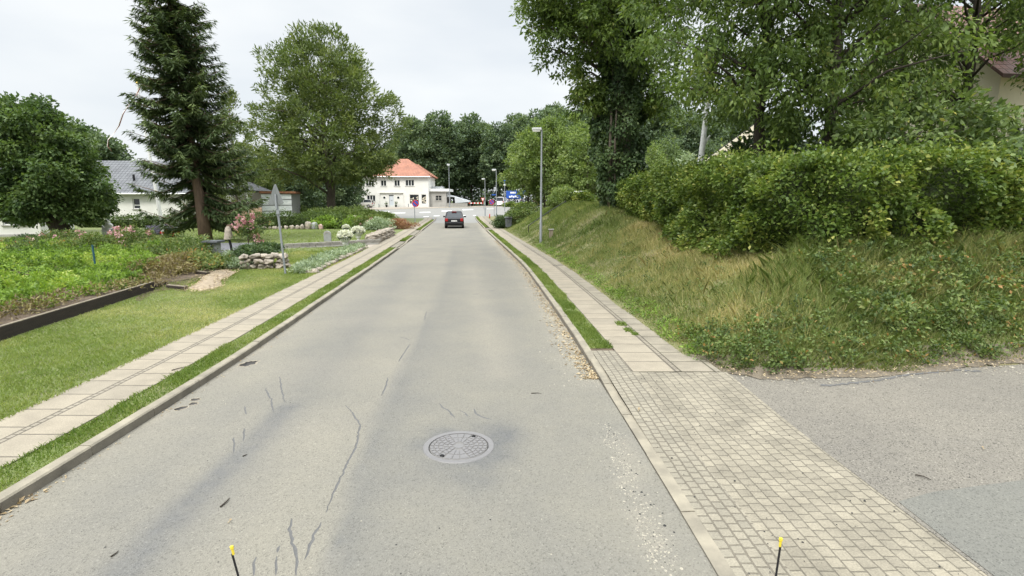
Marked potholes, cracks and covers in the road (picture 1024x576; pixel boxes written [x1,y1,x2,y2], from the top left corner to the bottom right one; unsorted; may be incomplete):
crack [265,377,285,412]
crack [304,405,361,559]
crack [439,403,489,419]
crack [232,407,247,453]
manhole cover [423,431,494,463]
